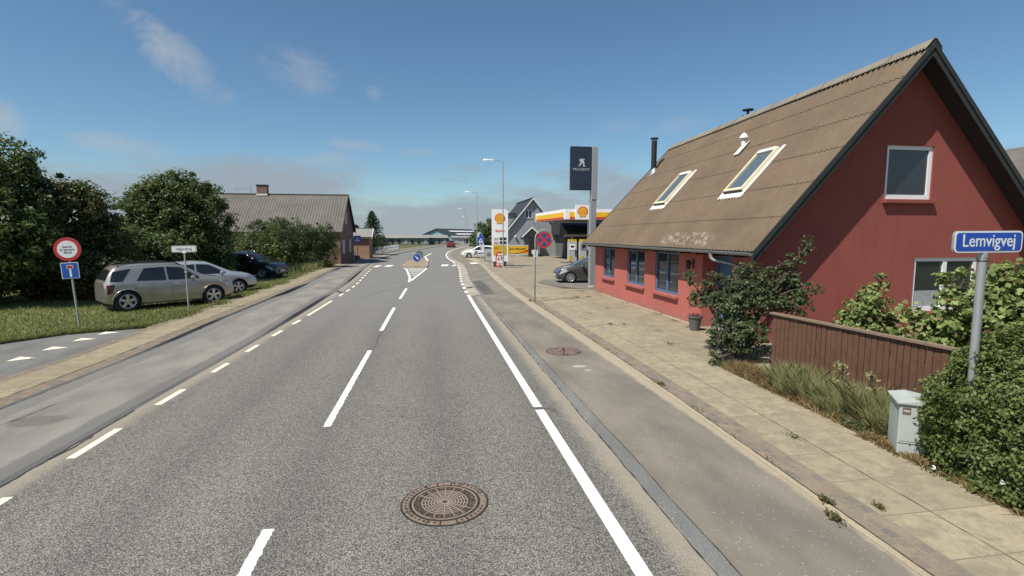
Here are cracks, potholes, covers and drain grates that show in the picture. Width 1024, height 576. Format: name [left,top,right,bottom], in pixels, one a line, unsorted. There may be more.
manhole cover [400,482,489,527]
manhole cover [546,347,581,356]
